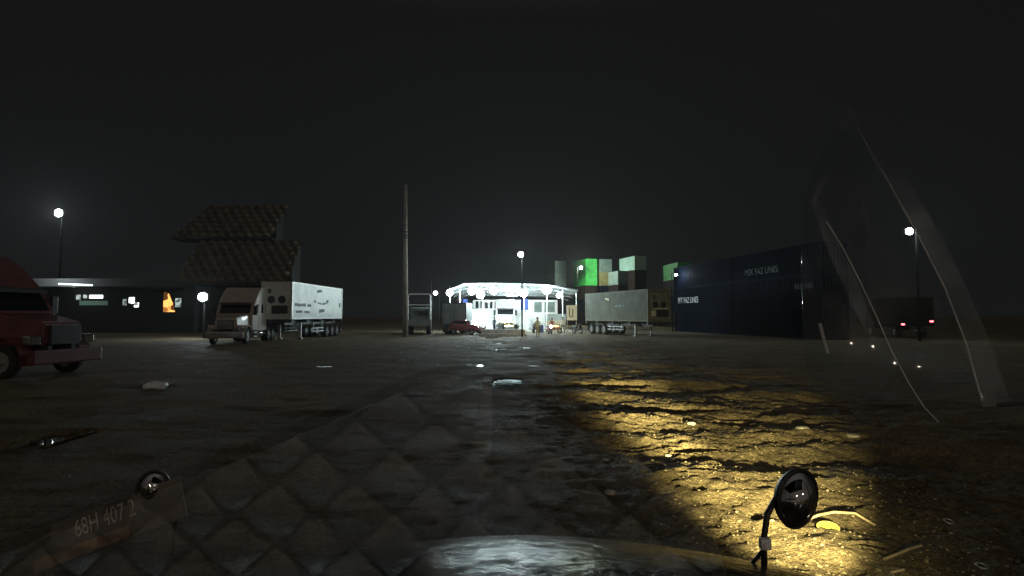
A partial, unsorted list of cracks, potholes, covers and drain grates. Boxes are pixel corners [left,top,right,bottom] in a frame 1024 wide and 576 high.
pothole [484,377,527,390]
